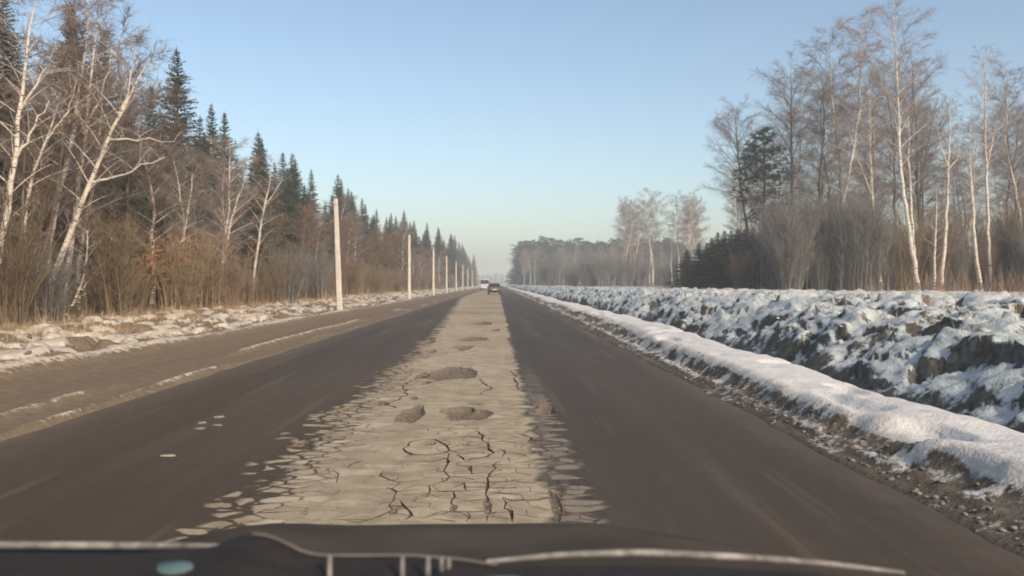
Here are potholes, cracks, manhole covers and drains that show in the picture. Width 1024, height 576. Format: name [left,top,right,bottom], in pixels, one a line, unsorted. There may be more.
pothole [535,405,557,415]
pothole [424,367,478,381]
pothole [439,406,494,421]
crack [196,367,597,524]
pothole [394,405,426,424]
